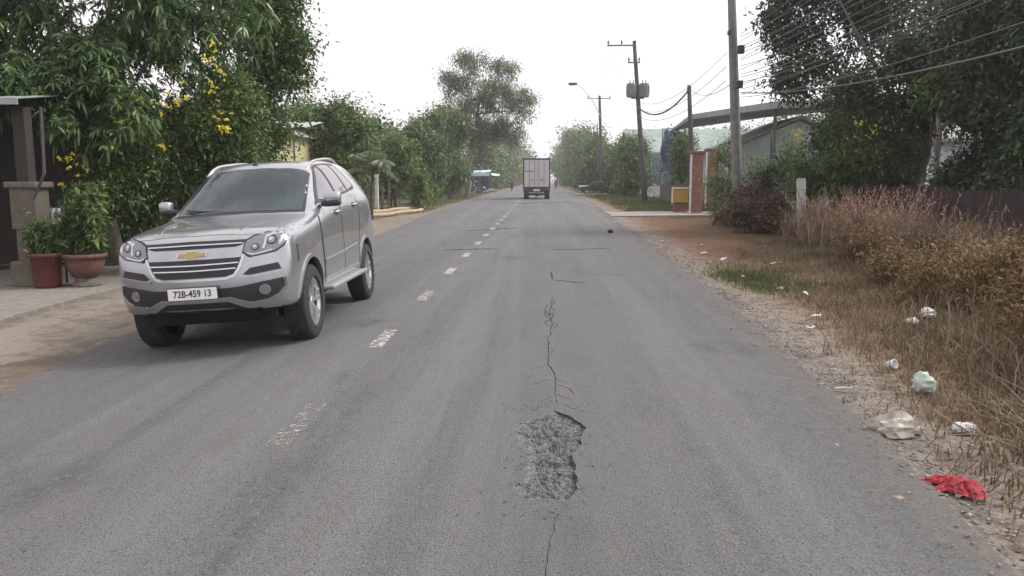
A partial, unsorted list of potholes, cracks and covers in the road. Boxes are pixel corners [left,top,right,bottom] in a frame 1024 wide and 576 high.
crack [533,274,584,412]
pothole [512,411,586,501]
